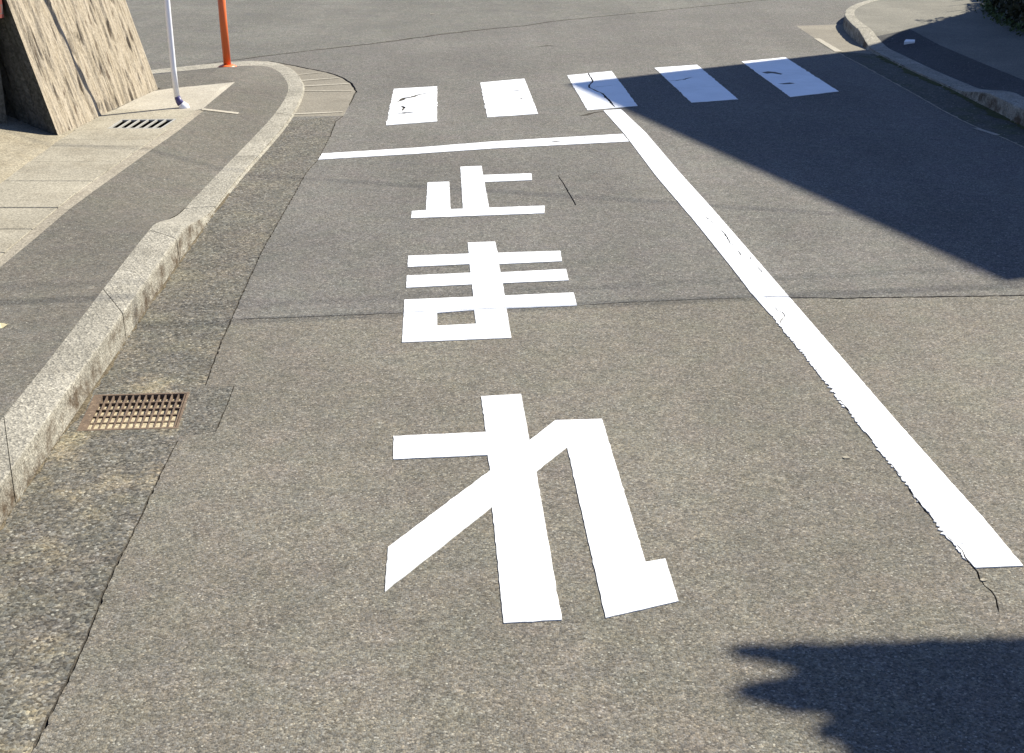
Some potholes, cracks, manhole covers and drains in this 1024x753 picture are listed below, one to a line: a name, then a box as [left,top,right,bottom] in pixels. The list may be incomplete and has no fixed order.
crack [775,308,1000,616]
crack [581,73,615,116]
drain grate [77,392,190,431]
drain grate [109,119,176,128]
